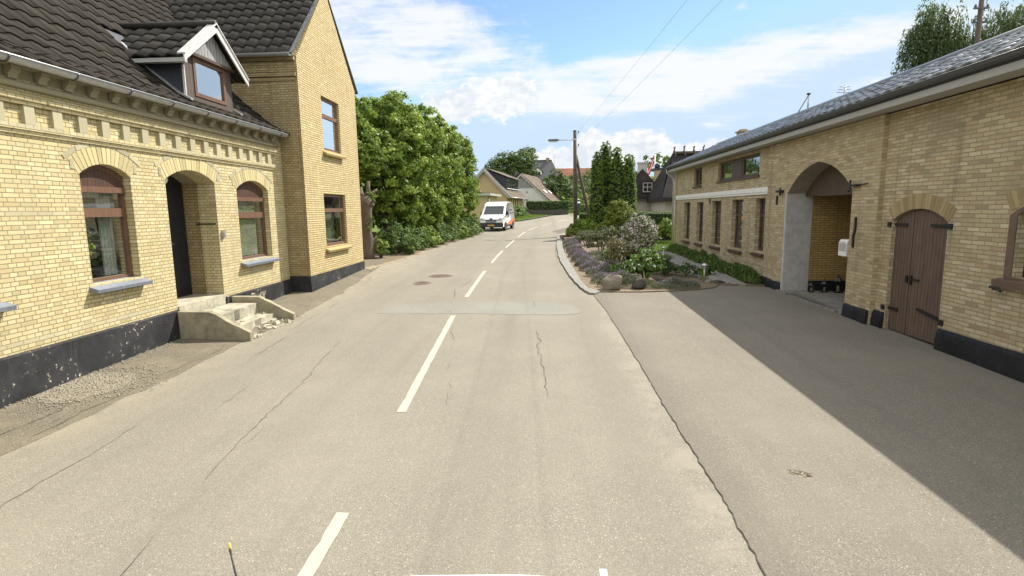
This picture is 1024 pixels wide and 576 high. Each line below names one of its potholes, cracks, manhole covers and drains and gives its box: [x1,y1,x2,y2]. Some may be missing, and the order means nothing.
pothole [787,469,813,478]
crack [120,339,342,576]
